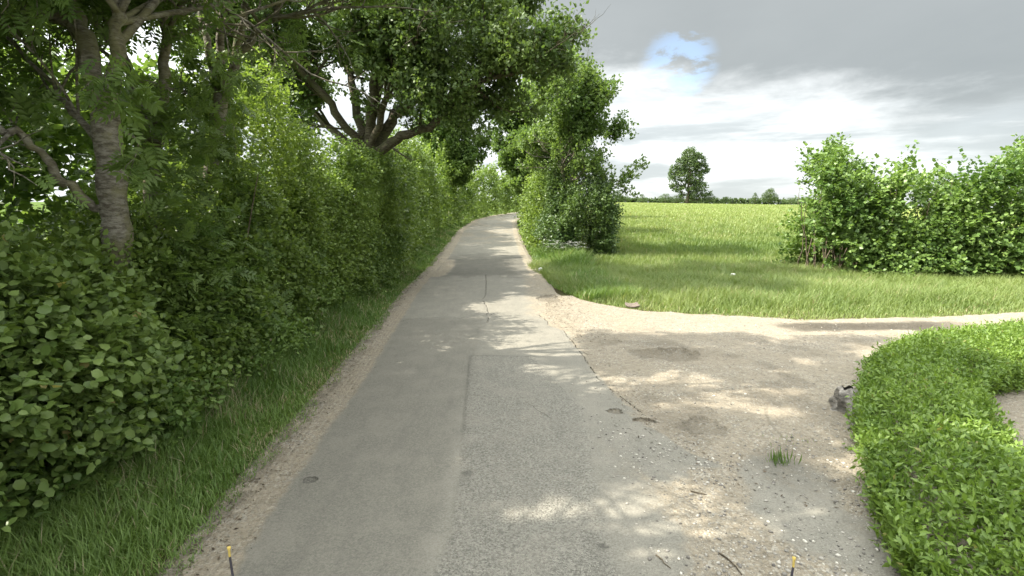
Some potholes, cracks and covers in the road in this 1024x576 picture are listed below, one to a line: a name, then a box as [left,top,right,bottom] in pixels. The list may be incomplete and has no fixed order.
pothole [665,412,740,440]
pothole [600,407,628,416]
pothole [614,345,716,365]
pothole [625,415,670,426]
